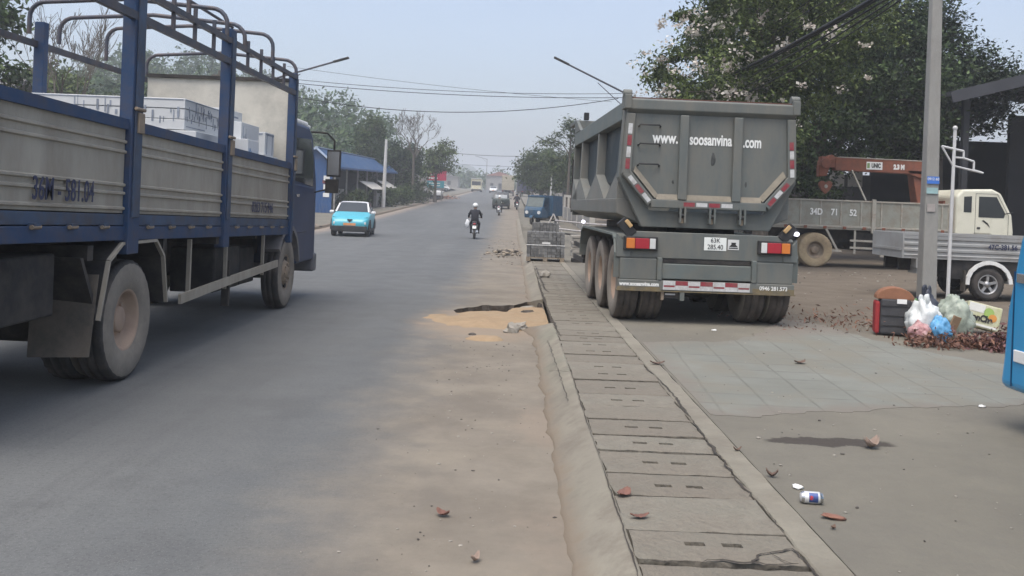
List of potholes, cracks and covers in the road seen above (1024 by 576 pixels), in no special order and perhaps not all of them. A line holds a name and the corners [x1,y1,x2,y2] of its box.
crack [648,548,819,576]
pothole [454,302,543,313]
